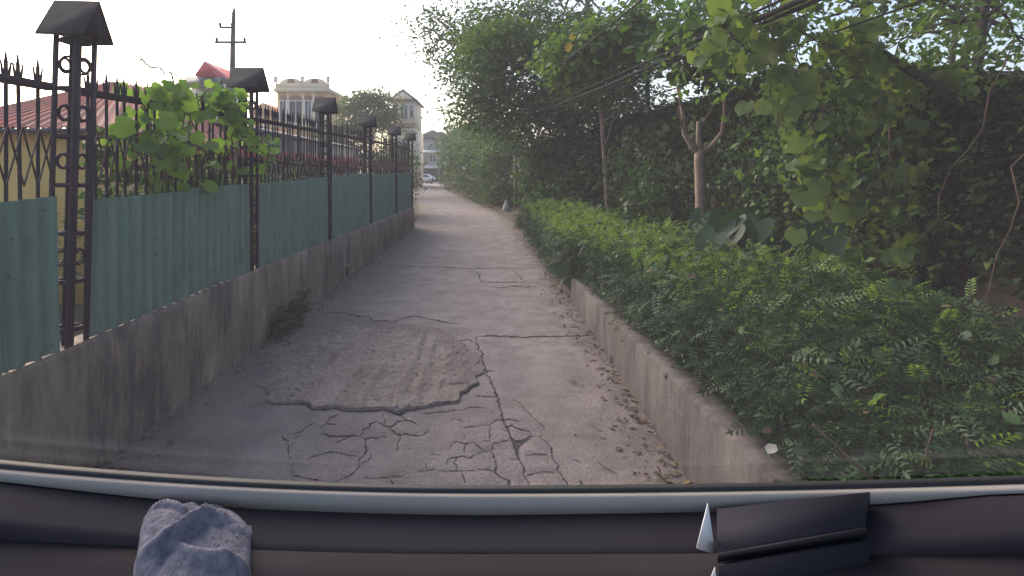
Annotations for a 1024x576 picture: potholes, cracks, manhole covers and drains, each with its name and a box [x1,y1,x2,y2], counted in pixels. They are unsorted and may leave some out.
crack [330,312,448,323]
crack [267,337,616,485]
crack [469,269,536,288]
